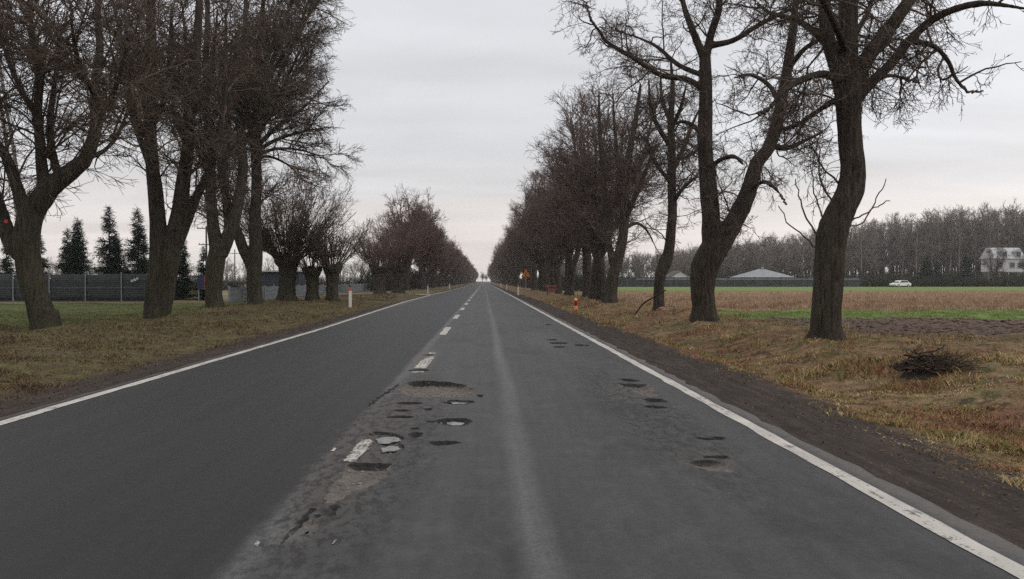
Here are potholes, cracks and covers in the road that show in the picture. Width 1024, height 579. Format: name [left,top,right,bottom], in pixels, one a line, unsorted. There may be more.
pothole [618,383,664,397]
pothole [399,381,477,398]
pothole [426,418,473,426]
crack [280,507,317,544]
pothole [365,431,405,455]
pothole [689,460,734,473]
